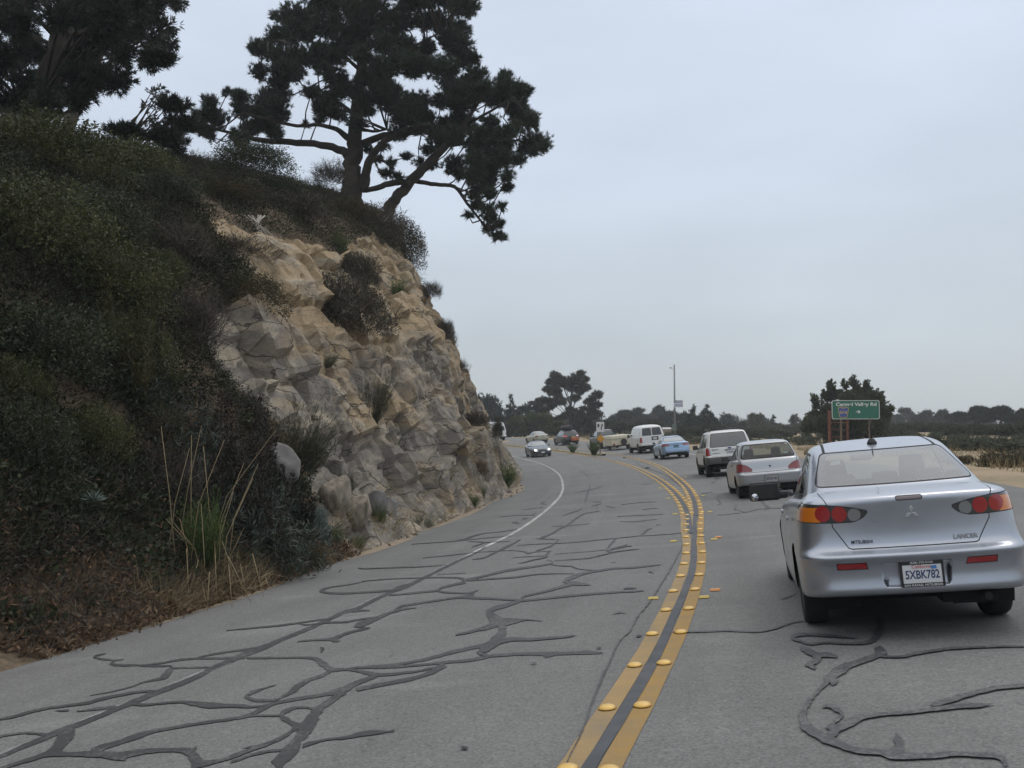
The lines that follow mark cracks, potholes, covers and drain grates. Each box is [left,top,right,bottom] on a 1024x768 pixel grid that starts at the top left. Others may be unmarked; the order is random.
crack [358,483,676,574]
